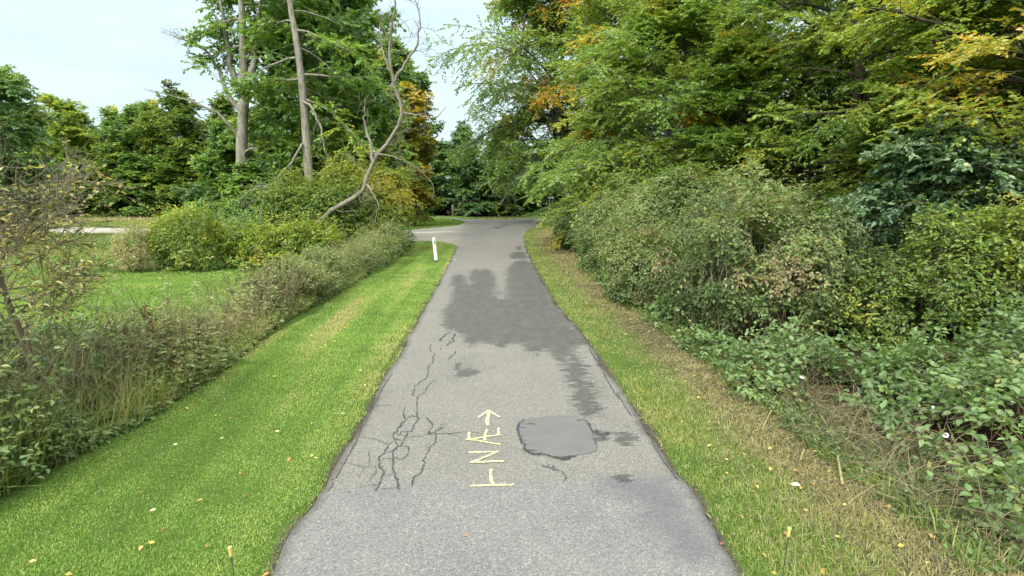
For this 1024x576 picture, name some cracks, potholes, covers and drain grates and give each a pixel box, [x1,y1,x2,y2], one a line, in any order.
crack [516,348,678,482]
crack [326,332,481,492]
